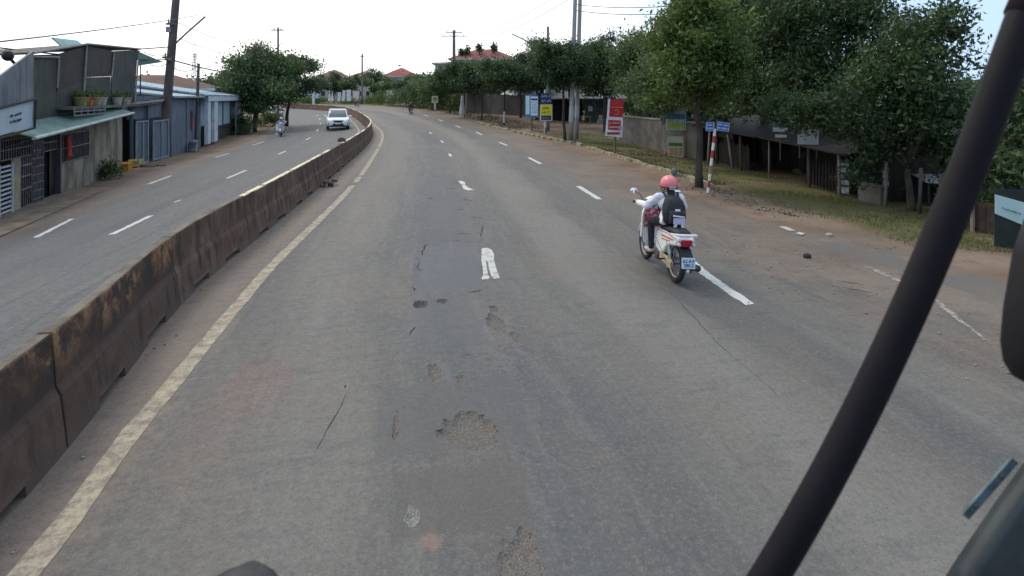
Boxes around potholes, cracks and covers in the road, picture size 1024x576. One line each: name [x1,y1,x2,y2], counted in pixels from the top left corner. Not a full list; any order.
pothole [455,374,467,387]
pothole [435,410,501,452]
crack [412,170,484,290]
pothole [508,331,524,343]
pothole [486,313,506,332]
pothole [495,525,547,576]
pothole [428,363,442,382]
